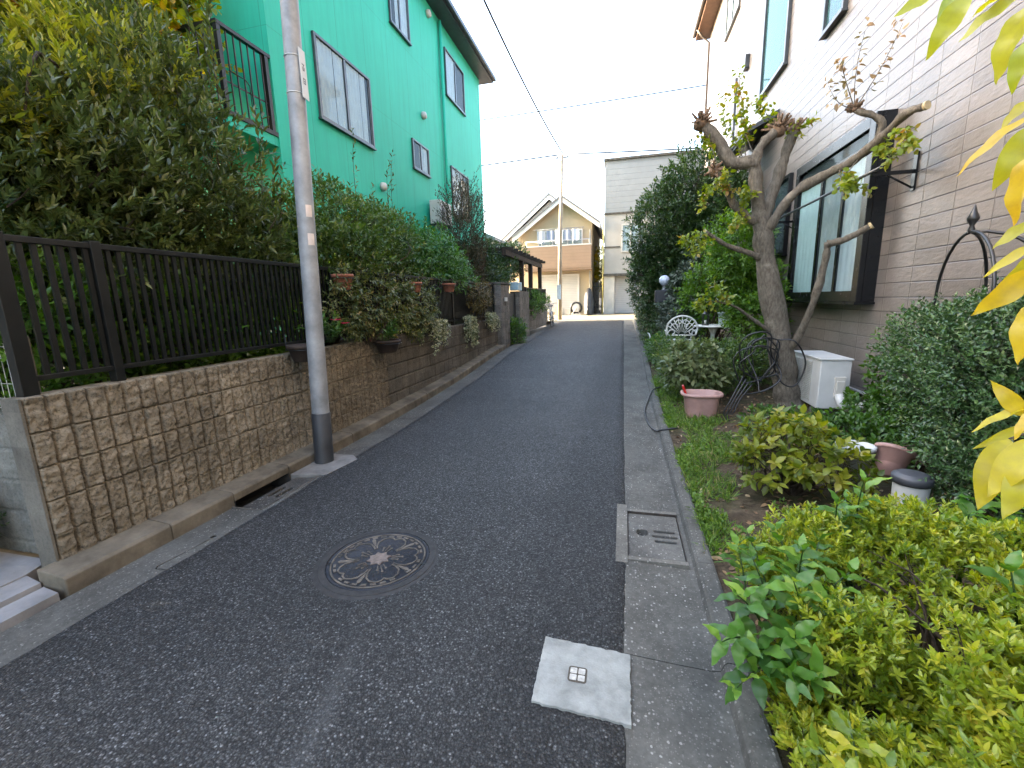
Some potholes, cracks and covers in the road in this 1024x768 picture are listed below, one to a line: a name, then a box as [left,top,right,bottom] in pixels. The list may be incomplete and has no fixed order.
manhole cover [312,529,438,600]
drain grate [232,473,319,510]
utility cover [531,636,632,729]
